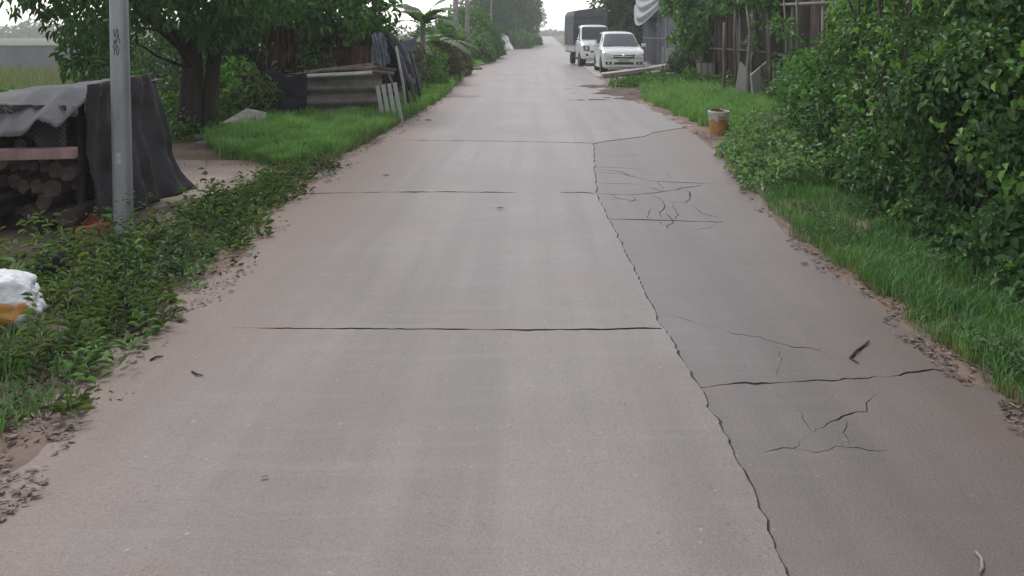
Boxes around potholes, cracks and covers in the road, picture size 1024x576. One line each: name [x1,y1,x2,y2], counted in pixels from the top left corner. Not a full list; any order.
crack [601,155,715,230]
crack [679,317,819,377]
crack [702,369,949,453]
